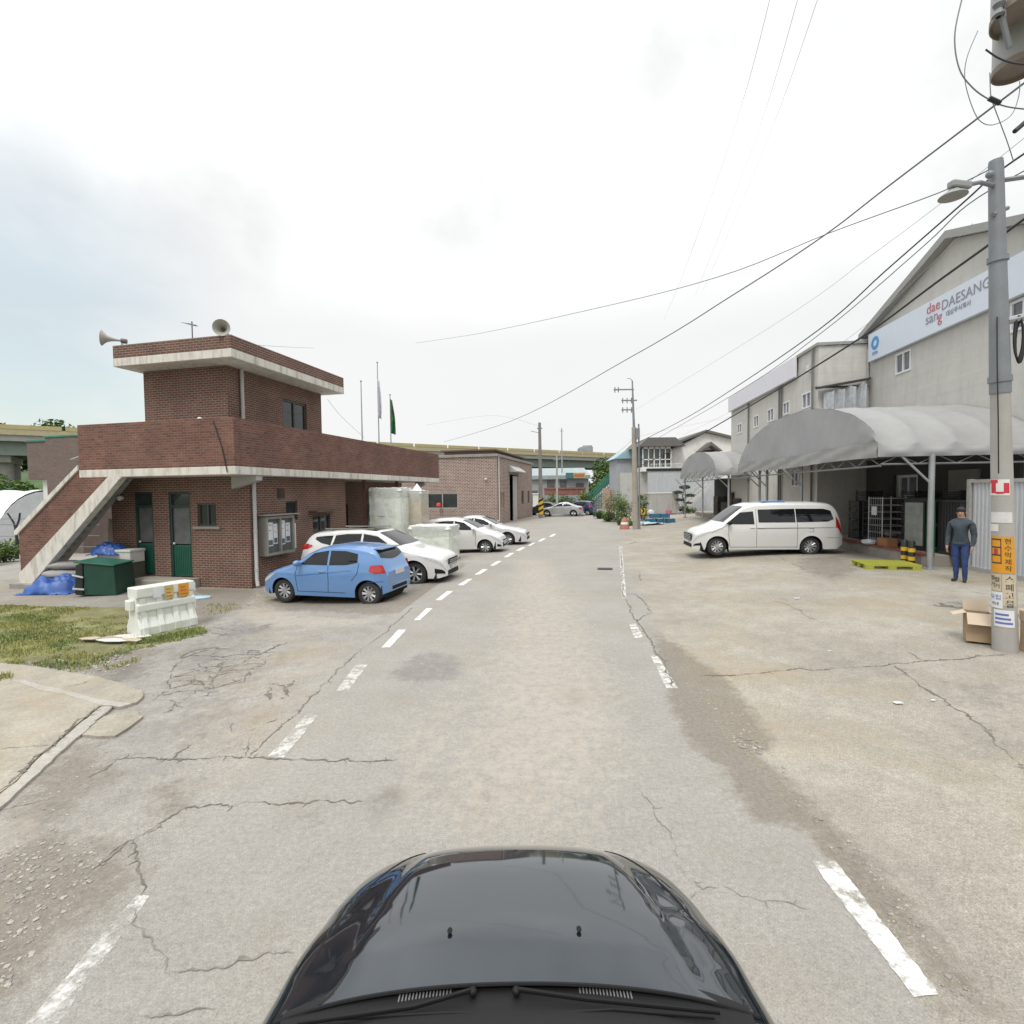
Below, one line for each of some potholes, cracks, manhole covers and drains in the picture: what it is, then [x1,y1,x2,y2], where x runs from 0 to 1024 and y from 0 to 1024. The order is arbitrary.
crack [602,534,675,686]
crack [703,652,1024,768]
crack [132,909,293,973]
crack [91,799,360,895]
crack [636,786,805,909]
crack [88,610,409,778]
